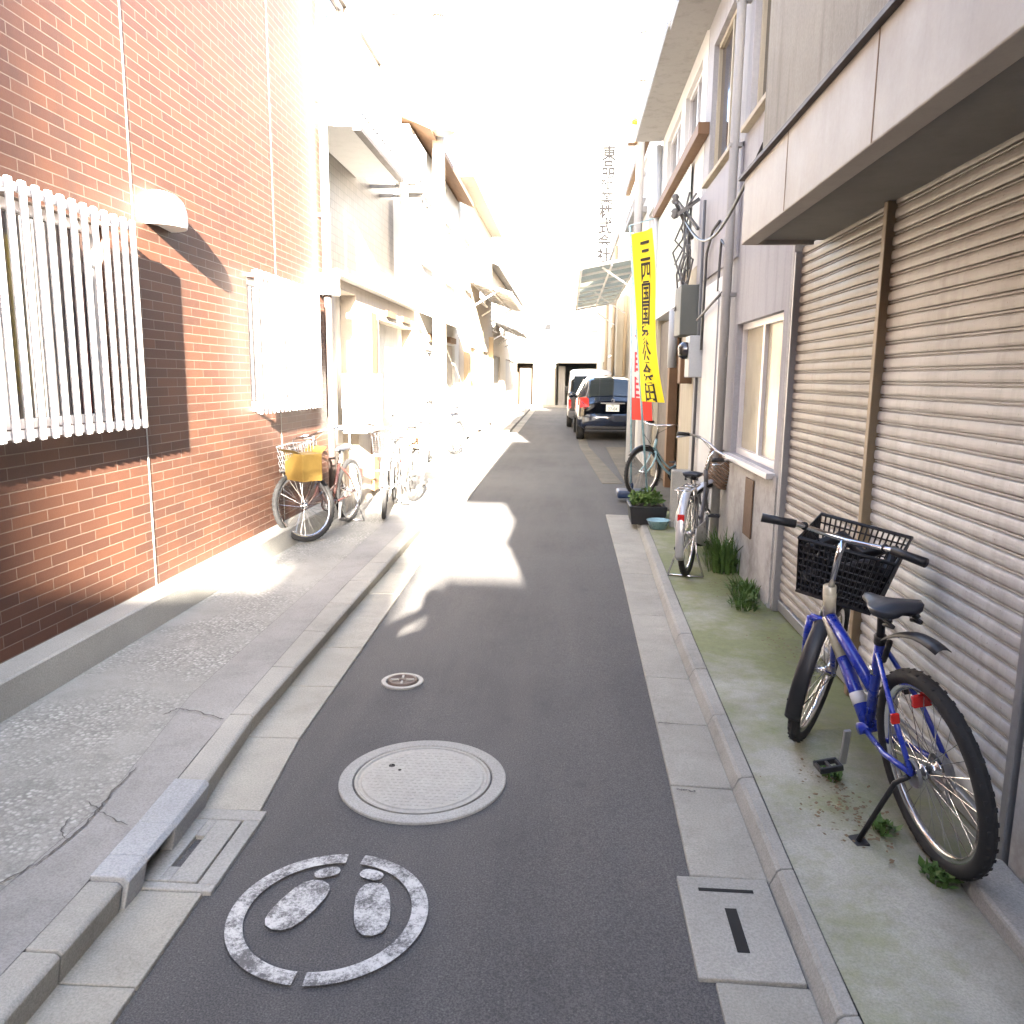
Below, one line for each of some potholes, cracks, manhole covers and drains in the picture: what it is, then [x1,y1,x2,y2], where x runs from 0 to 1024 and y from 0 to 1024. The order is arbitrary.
manhole cover [338,740,506,825]
manhole cover [381,673,424,690]
drain grate [676,876,807,989]
